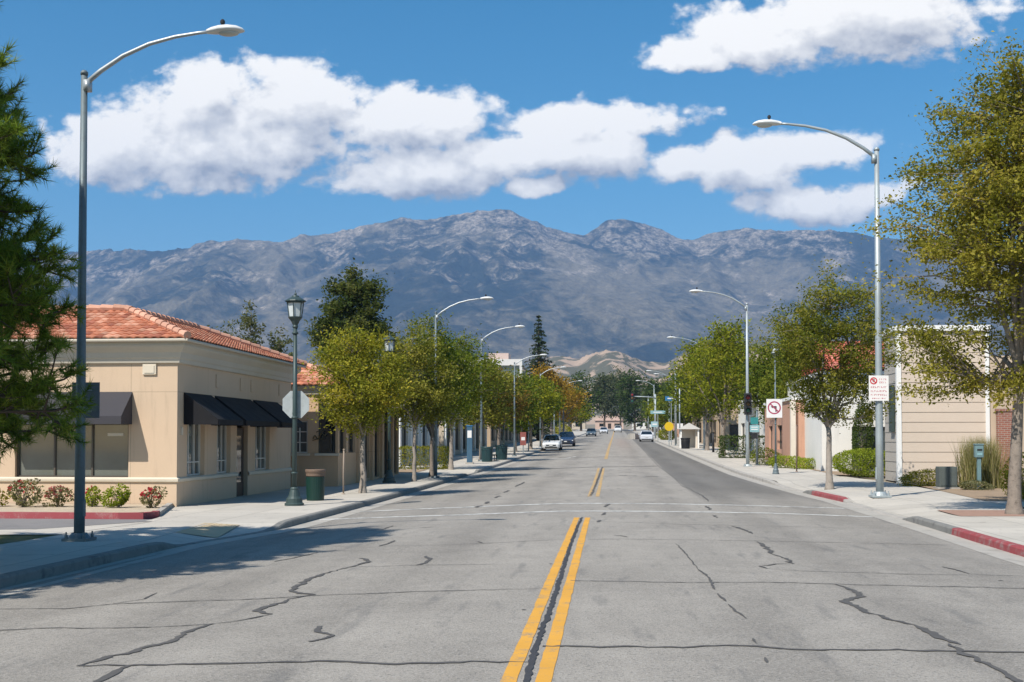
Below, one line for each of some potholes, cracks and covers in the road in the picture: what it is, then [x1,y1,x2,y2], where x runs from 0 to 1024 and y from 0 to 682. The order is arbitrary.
crack [310,626,334,642]
crack [676,544,768,662]
